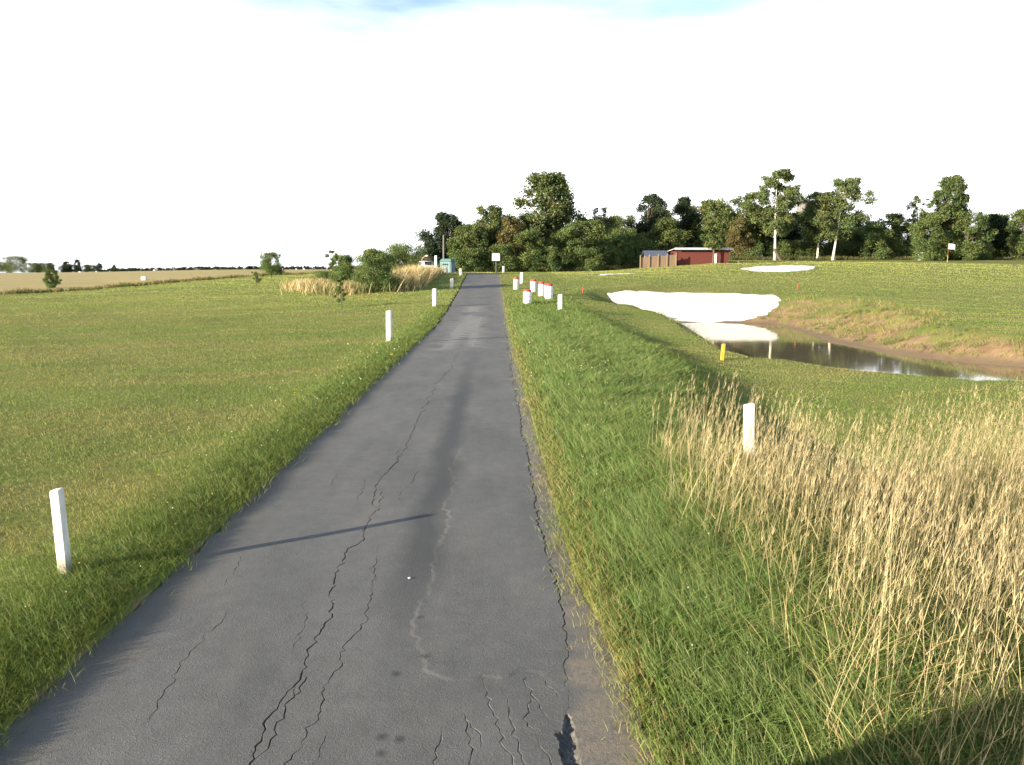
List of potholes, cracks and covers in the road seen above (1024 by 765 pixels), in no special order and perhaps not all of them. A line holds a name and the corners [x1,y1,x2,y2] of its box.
crack [432,321,570,765]
pothole [554,714,582,765]
crack [141,340,463,765]
